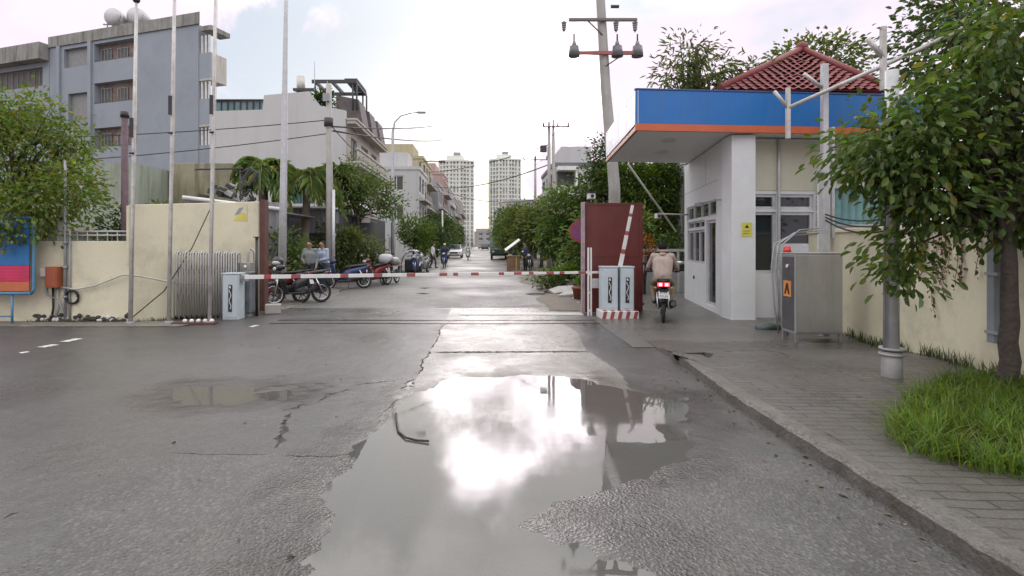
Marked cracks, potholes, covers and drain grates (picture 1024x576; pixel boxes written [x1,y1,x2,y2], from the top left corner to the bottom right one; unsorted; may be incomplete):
crack [190,381,386,457]
